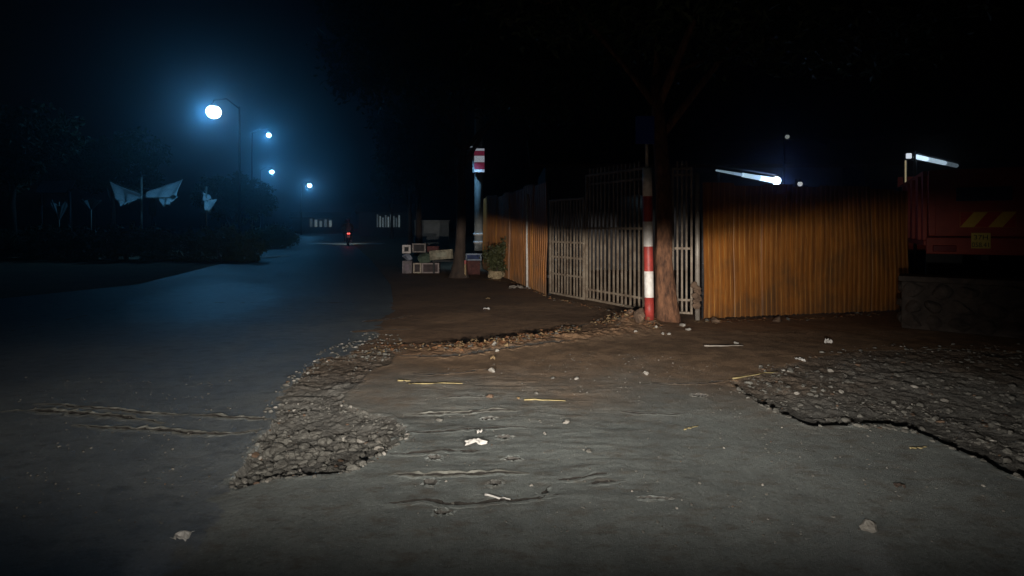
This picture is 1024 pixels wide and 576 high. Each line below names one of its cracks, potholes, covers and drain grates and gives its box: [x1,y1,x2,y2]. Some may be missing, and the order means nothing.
crack [0,403,272,438]
crack [384,394,627,511]
pothole [731,348,1024,479]
pothole [229,348,412,489]
pothole [484,478,506,489]
pothole [424,453,444,462]
pothole [429,507,458,518]
